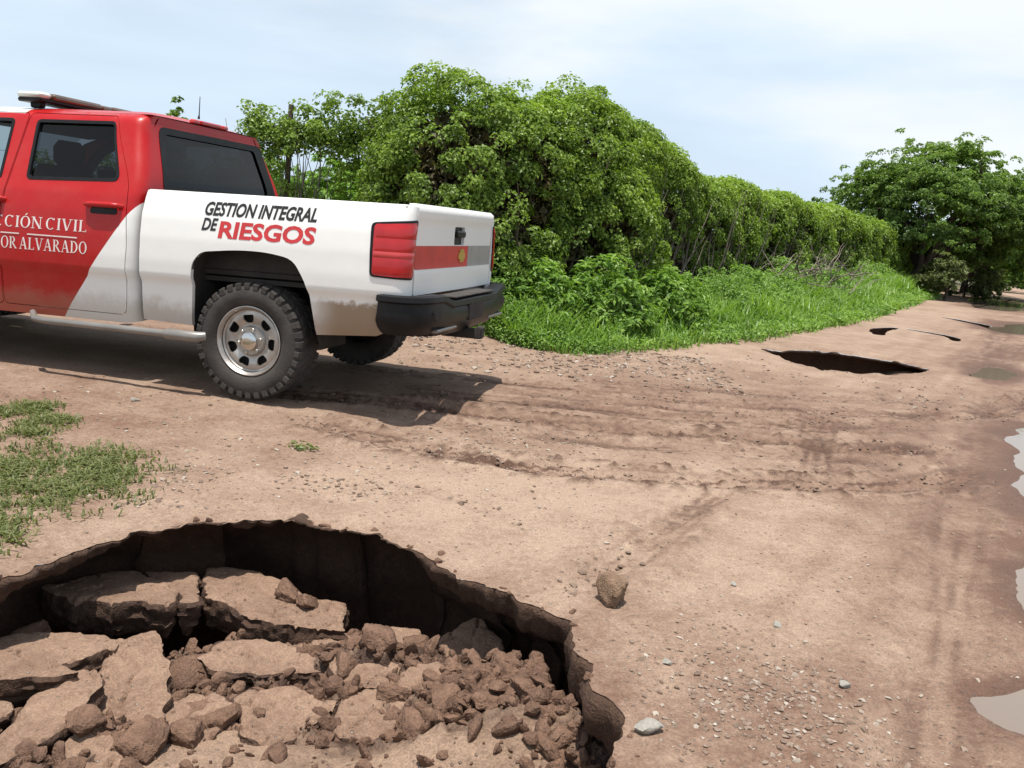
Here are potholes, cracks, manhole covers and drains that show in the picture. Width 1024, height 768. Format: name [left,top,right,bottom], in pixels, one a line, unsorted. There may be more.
pothole [761,349,929,375]
pothole [0,513,625,768]
